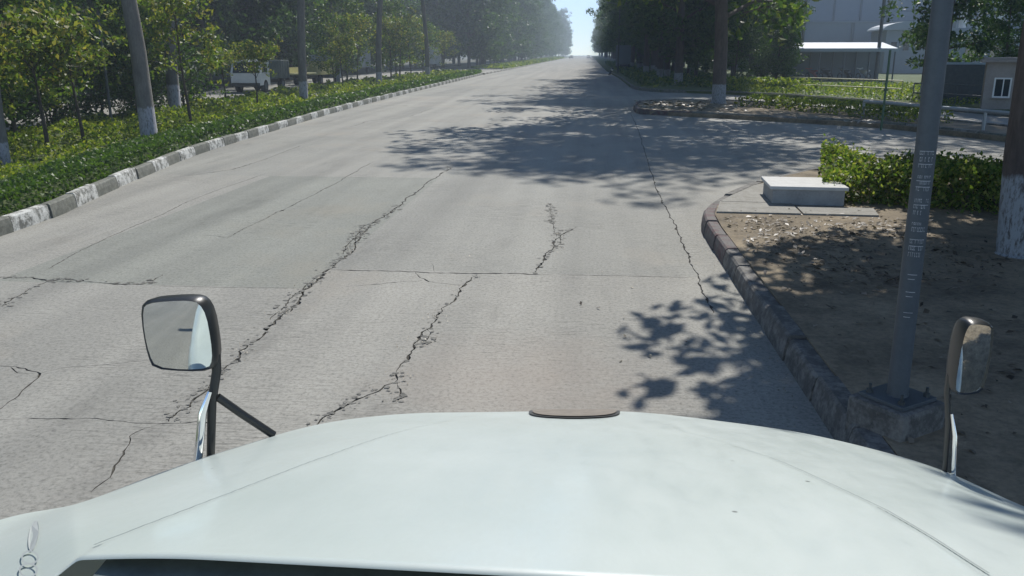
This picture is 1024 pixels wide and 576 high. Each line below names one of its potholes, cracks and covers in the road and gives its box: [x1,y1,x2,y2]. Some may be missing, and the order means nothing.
crack [0,166,588,492]
crack [631,115,714,313]
